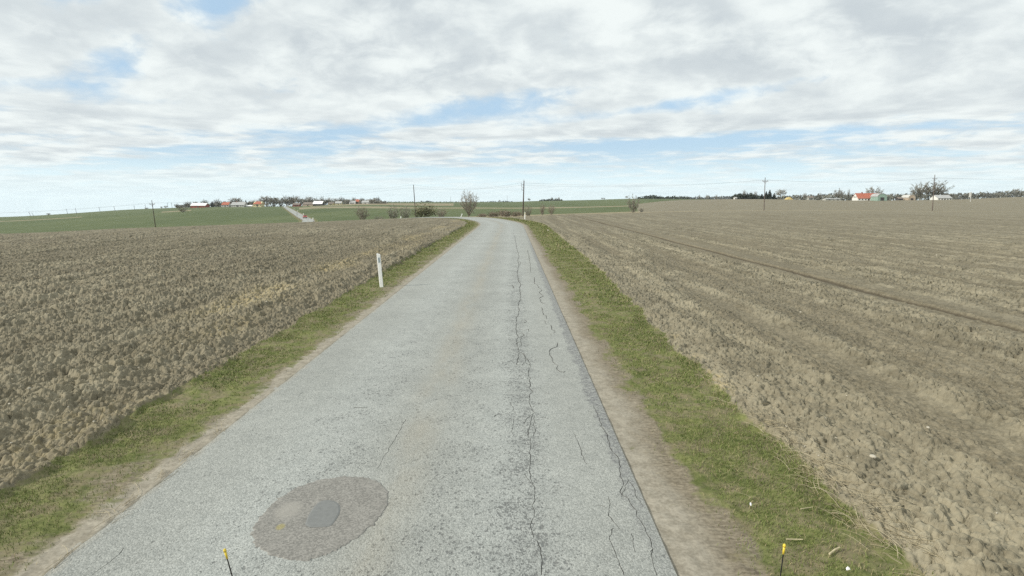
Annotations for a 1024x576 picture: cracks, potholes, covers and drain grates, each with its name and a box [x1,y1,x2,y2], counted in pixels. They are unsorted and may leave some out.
crack [595,409,657,575]
crack [508,236,565,575]
